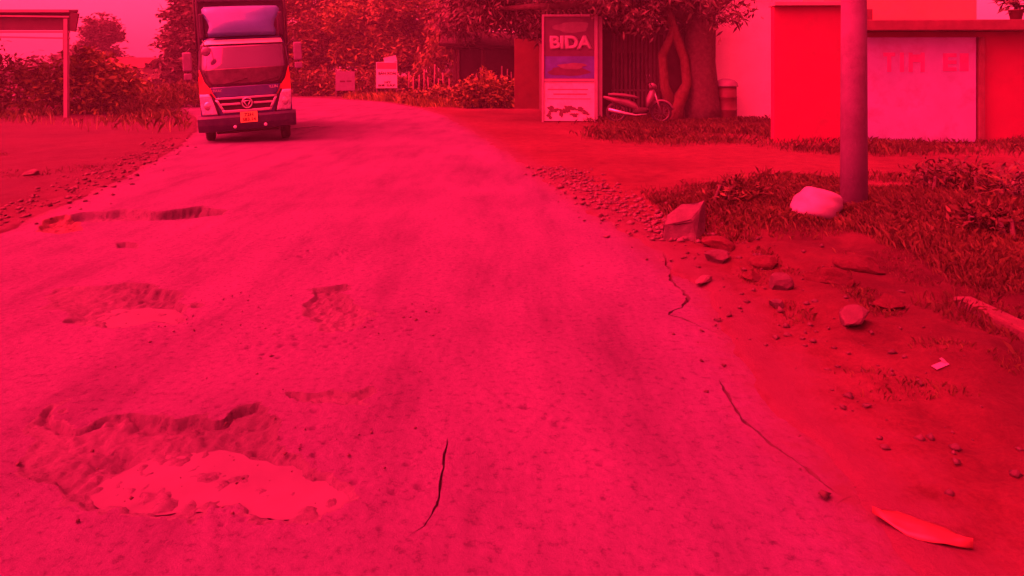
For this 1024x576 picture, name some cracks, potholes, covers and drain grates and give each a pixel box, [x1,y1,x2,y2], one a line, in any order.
pothole [70,206,228,223]
pothole [38,282,206,329]
pothole [284,386,378,406]
pothole [115,241,140,249]
pothole [301,284,379,333]
crack [400,436,455,543]
pothole [36,214,83,234]
crack [657,250,734,344]
crack [710,378,852,503]
pothole [14,398,359,525]
